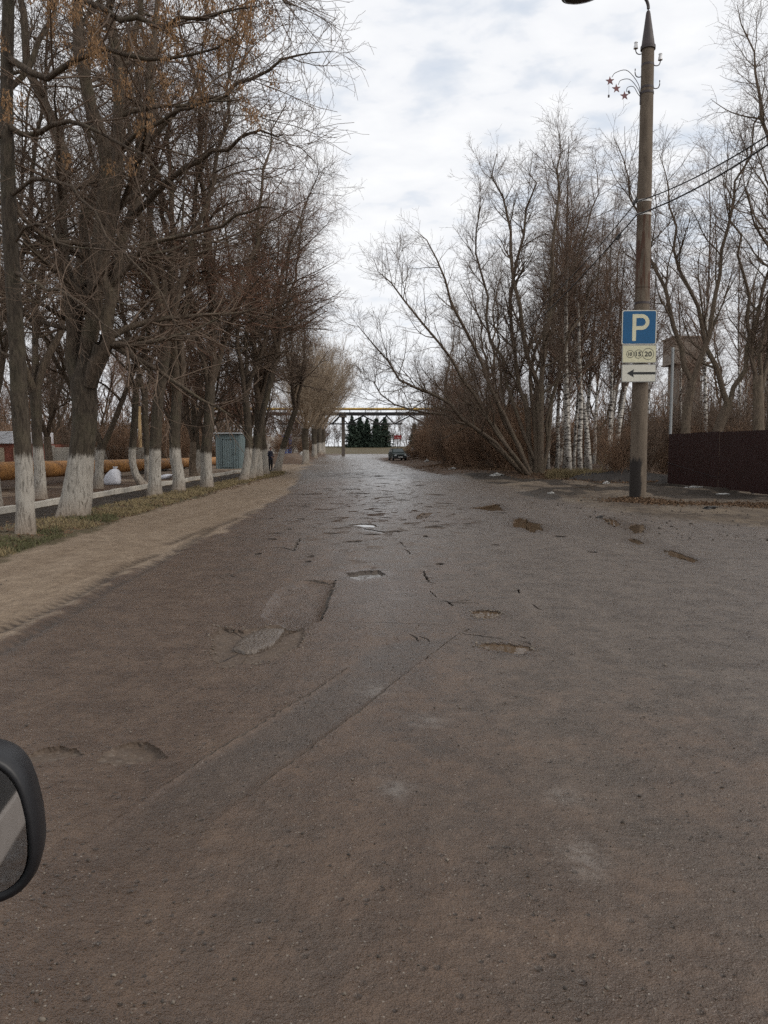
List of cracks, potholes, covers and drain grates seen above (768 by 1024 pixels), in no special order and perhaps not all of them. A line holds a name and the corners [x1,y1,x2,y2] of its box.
pothole [628,524,645,534]
pothole [511,517,543,533]
pothole [96,741,169,766]
pothole [465,609,505,619]
pothole [346,570,386,580]
crack [400,542,479,606]
pothole [468,641,538,655]
pothole [204,624,312,669]
pothole [663,550,698,563]
crack [410,629,532,664]
pothole [28,746,85,763]
